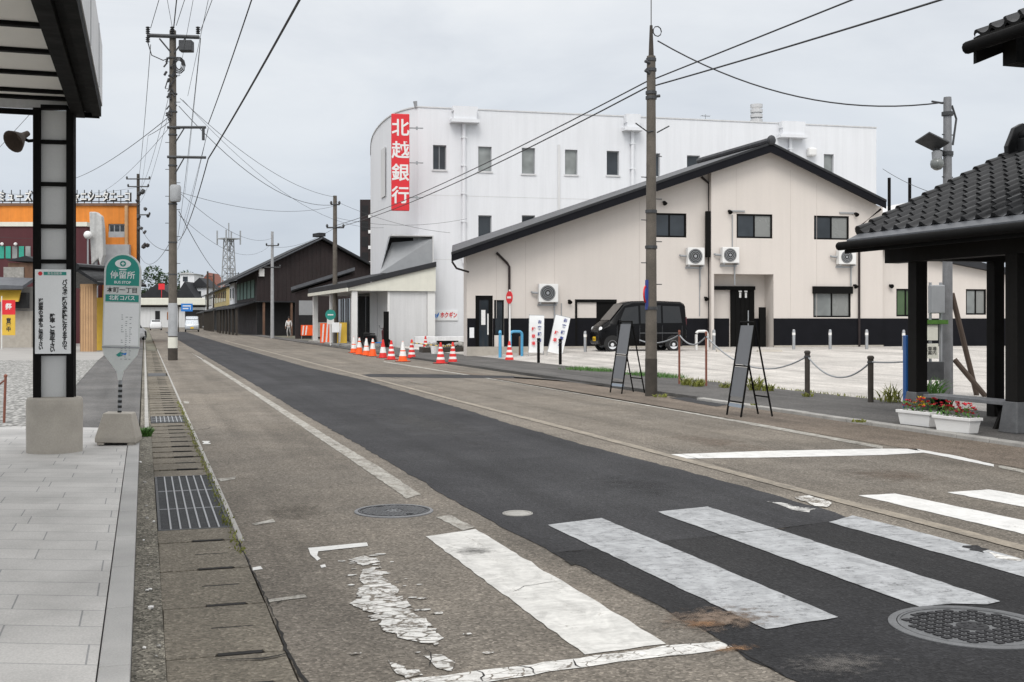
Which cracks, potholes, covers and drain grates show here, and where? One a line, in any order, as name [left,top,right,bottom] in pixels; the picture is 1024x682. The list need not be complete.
manhole cover [888,605,1024,650]
drain grate [155,475,232,531]
drain grate [151,415,187,423]
manhole cover [354,504,433,518]
